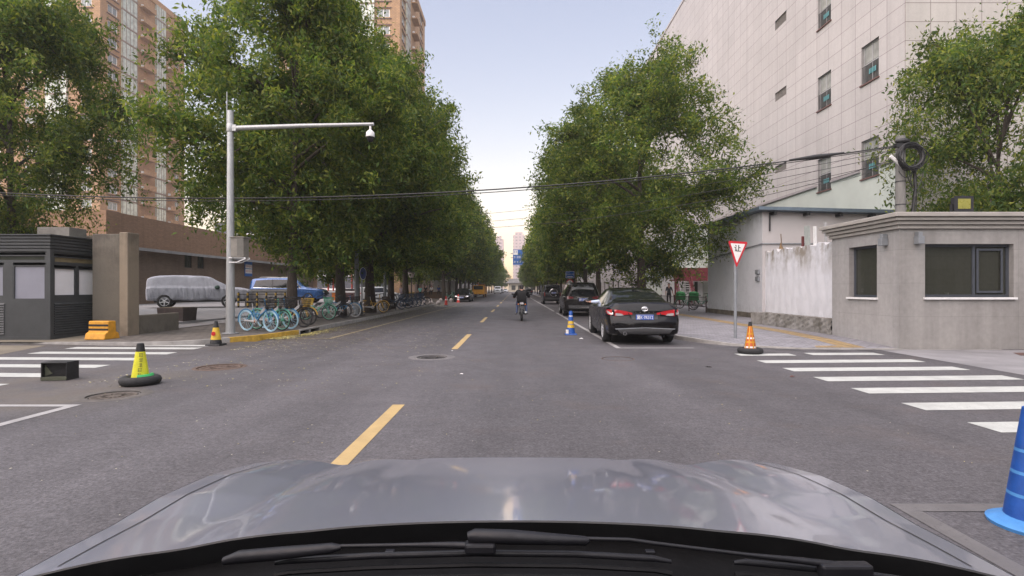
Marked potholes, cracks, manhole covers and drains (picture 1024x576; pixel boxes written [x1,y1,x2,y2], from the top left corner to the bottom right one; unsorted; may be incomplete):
manhole cover [70,389,154,402]
